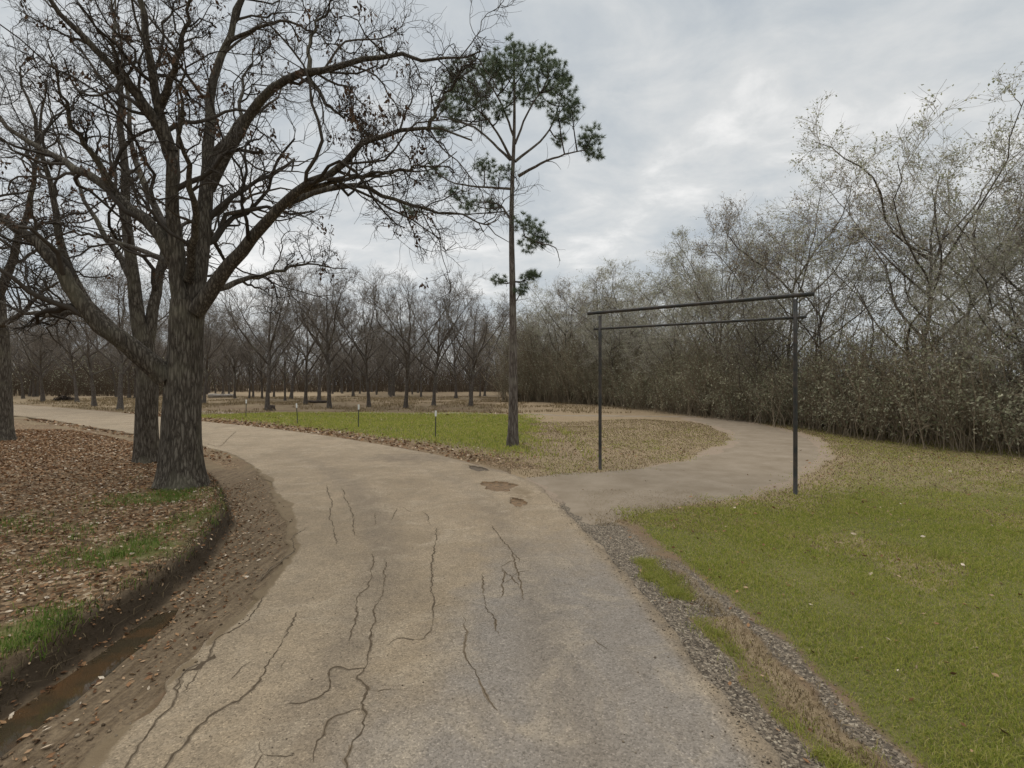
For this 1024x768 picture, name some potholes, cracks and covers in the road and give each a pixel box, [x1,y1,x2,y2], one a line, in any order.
crack [124,485,439,768]
crack [481,526,529,633]
pothole [507,496,531,508]
